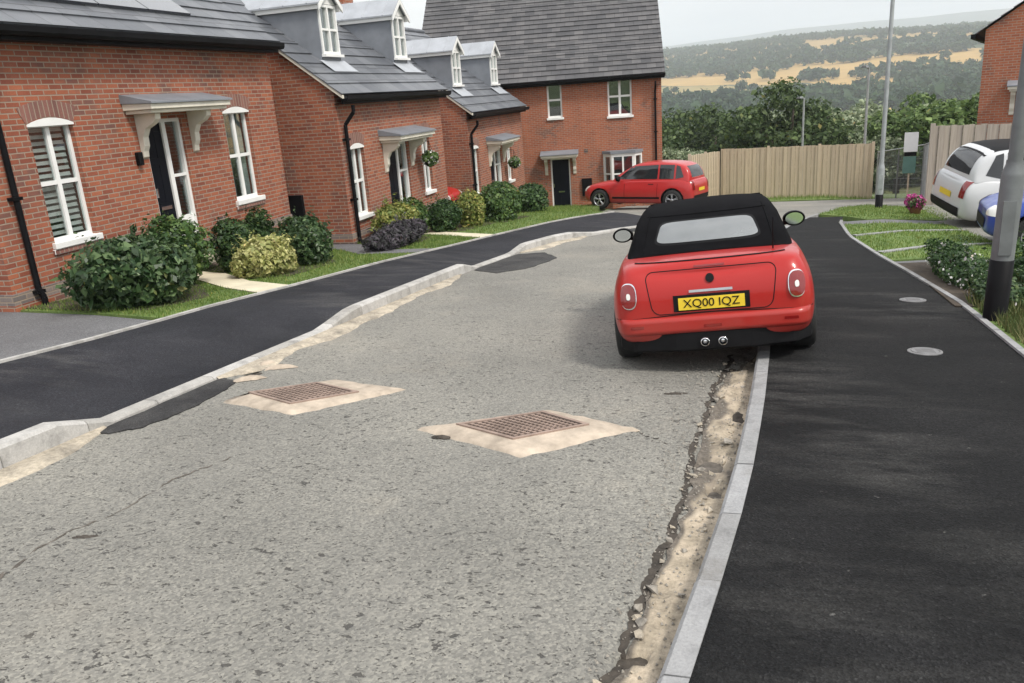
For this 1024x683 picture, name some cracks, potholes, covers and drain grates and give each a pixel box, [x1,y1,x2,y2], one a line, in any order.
pothole [616,657,648,670]
crack [0,457,230,579]
utility cover [907,347,943,356]
pothole [698,462,723,473]
